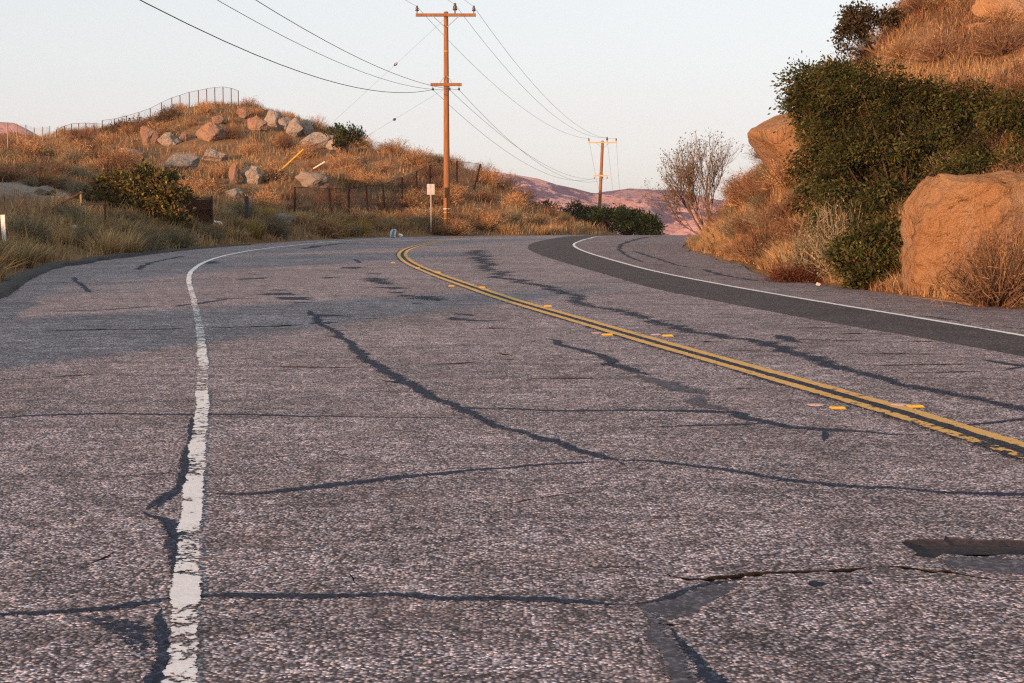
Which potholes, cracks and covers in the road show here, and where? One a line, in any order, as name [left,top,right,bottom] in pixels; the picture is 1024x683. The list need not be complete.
crack [493,490,607,507]
crack [800,327,981,373]
crack [541,566,1021,626]
crack [72,277,92,292]
crack [135,256,184,270]
pothole [902,536,1024,575]
